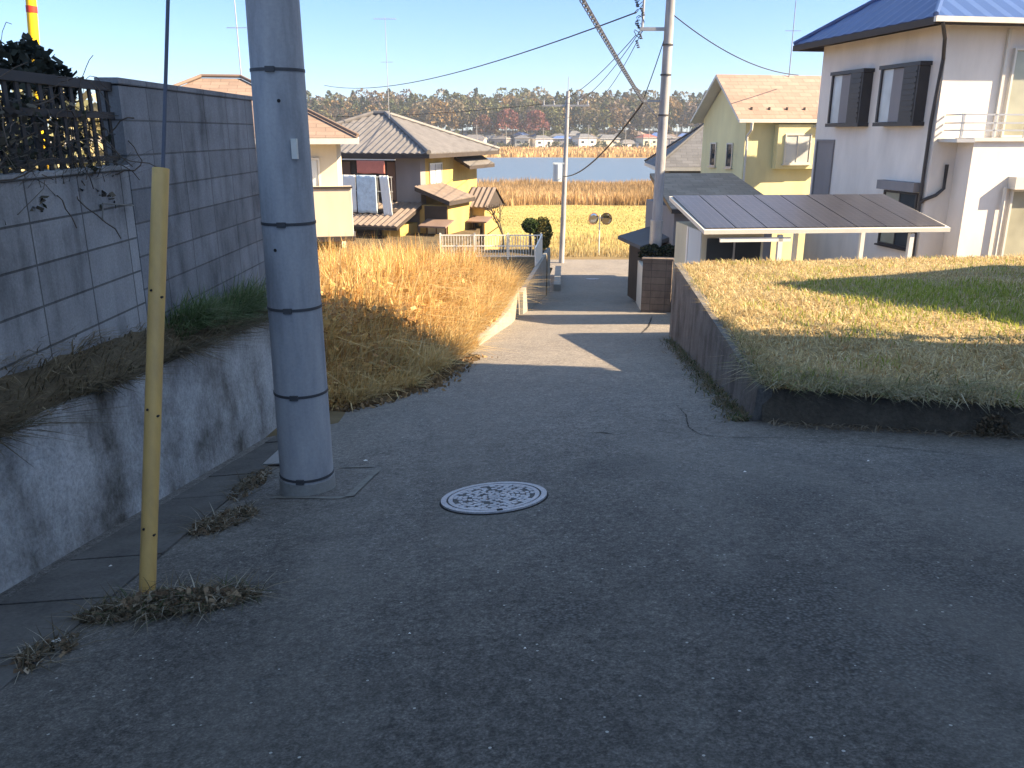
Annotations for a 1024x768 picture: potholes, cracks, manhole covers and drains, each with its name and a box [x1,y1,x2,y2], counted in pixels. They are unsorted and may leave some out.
manhole cover [439,482,549,515]
crack [677,406,1013,459]
